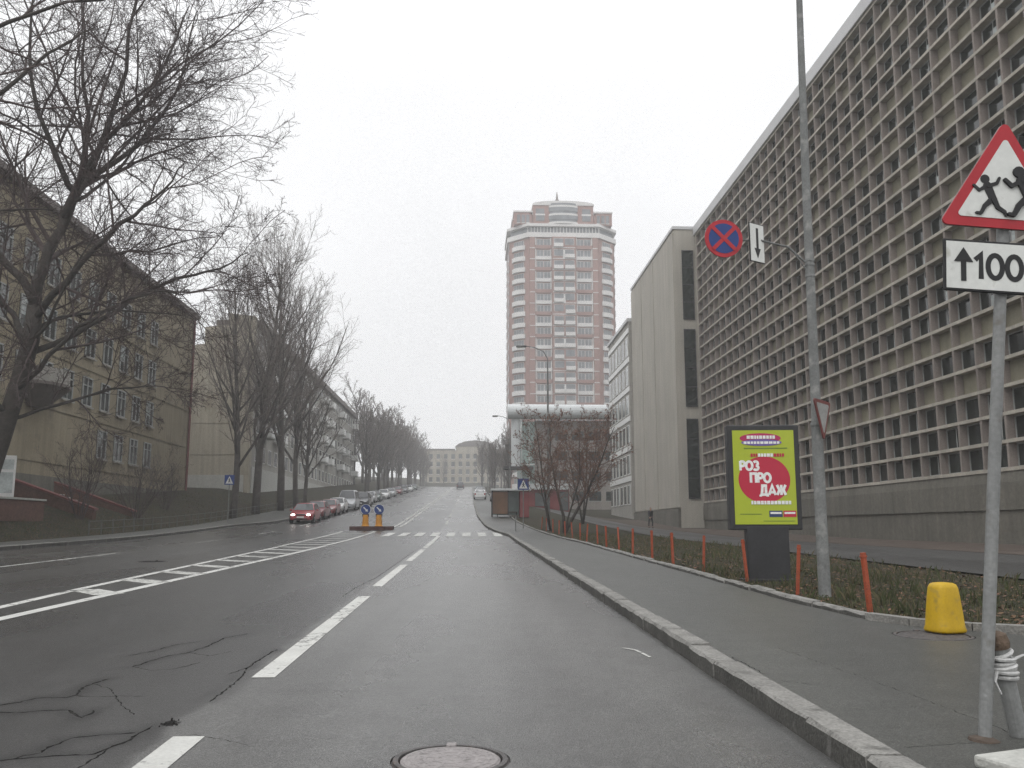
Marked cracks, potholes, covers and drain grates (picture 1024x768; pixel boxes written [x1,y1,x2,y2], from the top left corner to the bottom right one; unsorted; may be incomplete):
manhole cover [892,629,976,641]
manhole cover [390,742,510,768]
crack [0,680,151,768]
